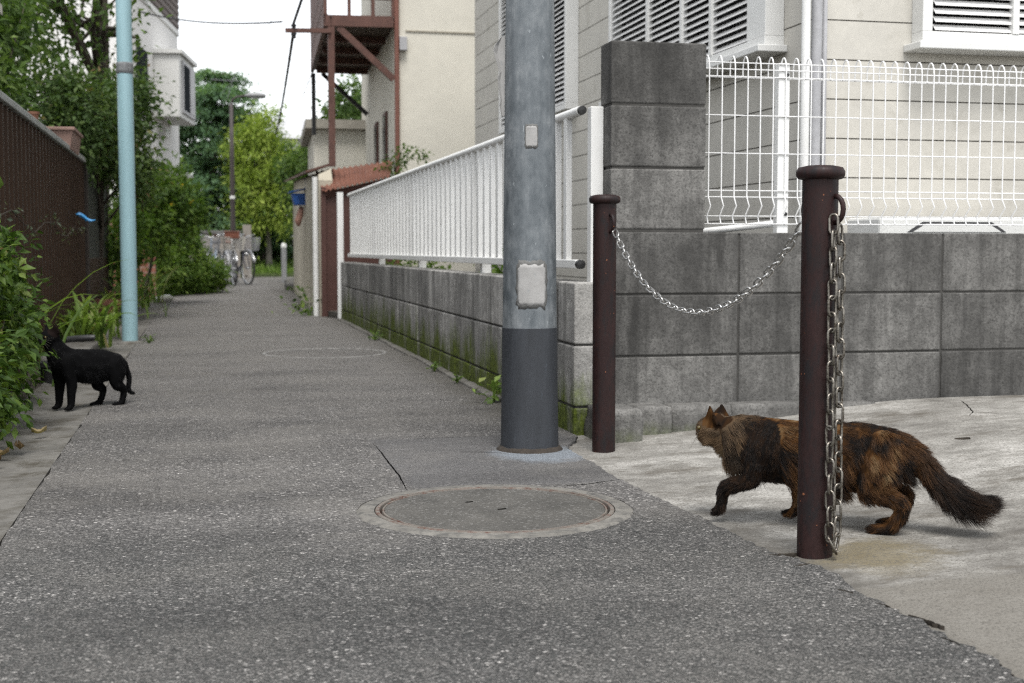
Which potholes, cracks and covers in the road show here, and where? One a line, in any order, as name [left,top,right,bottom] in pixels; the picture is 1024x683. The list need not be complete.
crack [373,444,407,490]
crack [875,602,960,645]
manhole cover [357,484,634,539]
manhole cover [262,348,387,358]
